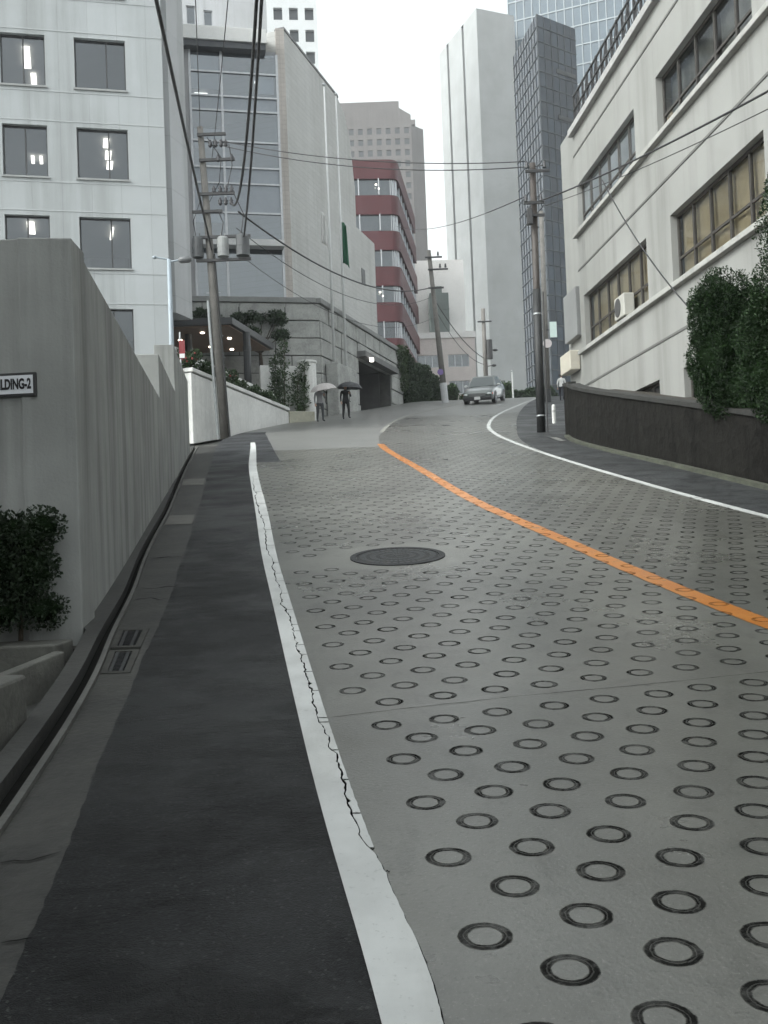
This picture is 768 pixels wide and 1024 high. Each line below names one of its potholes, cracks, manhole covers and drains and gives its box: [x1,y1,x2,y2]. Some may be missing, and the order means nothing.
drain grate [100,649,140,674]
crack [253,488,445,1024]
manhole cover [350,547,445,566]
crack [0,852,58,863]
drain grate [110,628,149,650]
